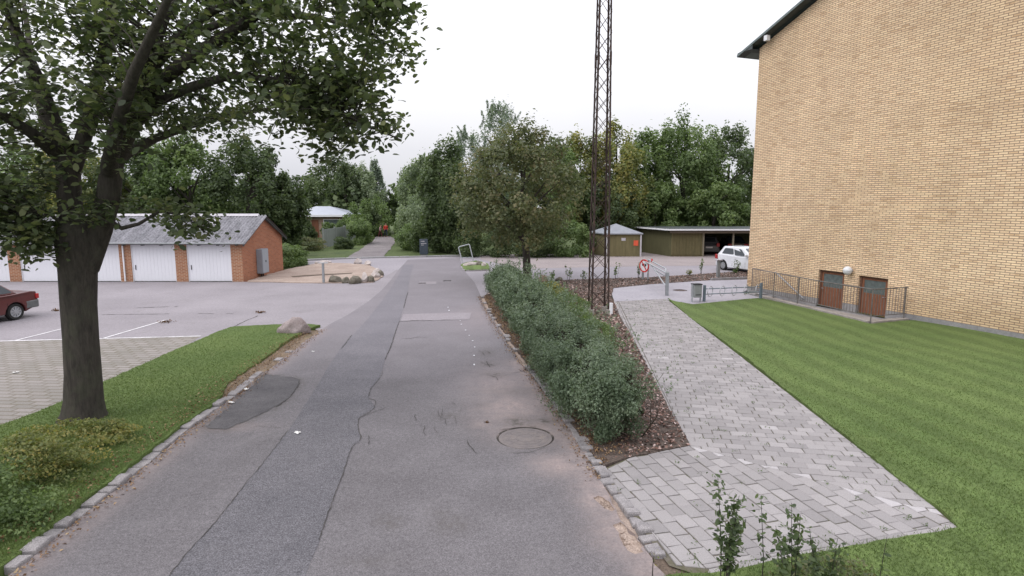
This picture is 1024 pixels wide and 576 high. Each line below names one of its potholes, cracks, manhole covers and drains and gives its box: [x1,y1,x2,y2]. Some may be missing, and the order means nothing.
manhole cover [496,427,554,449]
crack [319,371,383,540]
